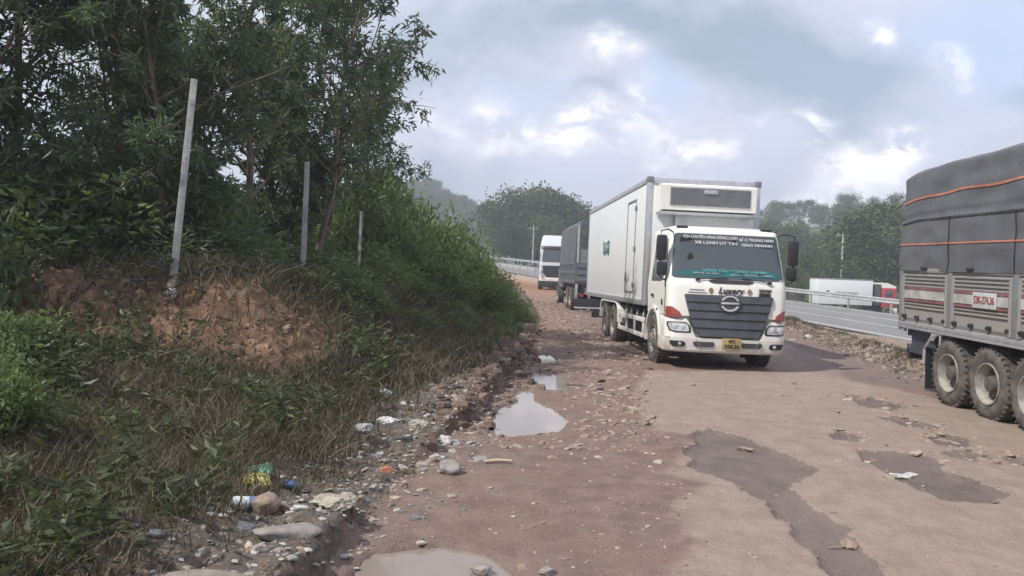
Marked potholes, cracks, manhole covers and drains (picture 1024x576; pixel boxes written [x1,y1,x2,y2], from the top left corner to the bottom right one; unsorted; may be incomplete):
pothole [331,538,530,576]
pothole [527,370,573,392]
pothole [481,386,577,437]
pothole [534,353,558,363]
